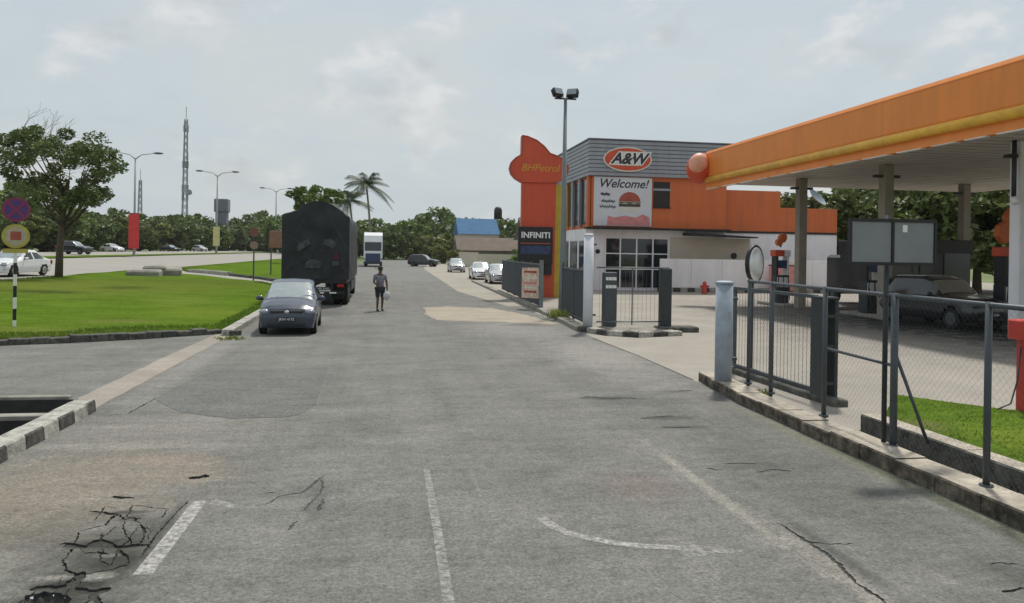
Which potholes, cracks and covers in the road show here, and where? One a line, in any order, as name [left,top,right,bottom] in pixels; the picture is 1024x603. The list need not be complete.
pothole [24,591,72,603]
crack [265,475,325,531]
crack [7,496,189,603]
crack [778,523,886,603]
